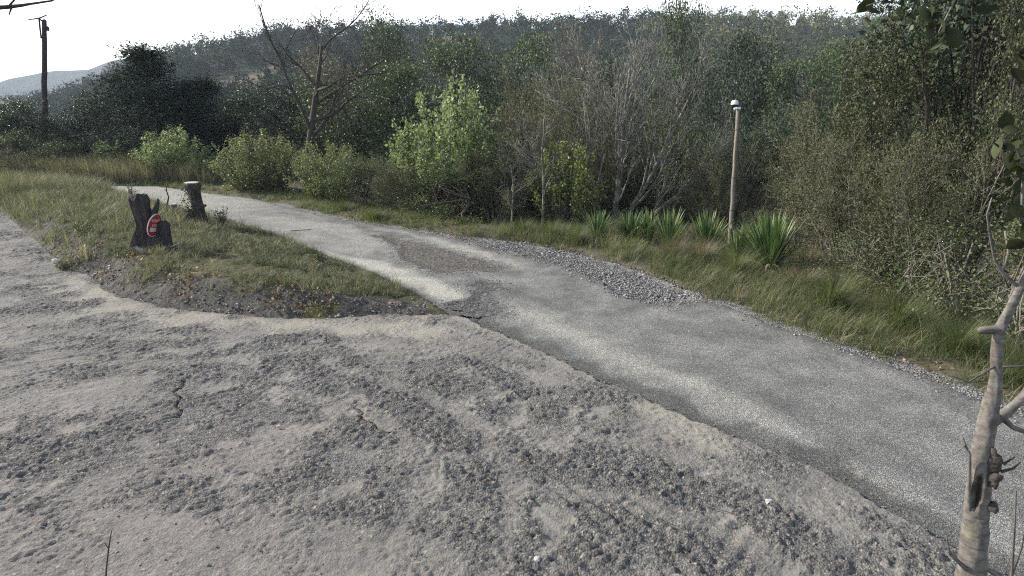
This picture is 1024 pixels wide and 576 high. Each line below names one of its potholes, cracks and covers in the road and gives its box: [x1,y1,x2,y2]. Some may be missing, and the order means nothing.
crack [354,408,400,441]
pothole [443,290,502,318]
